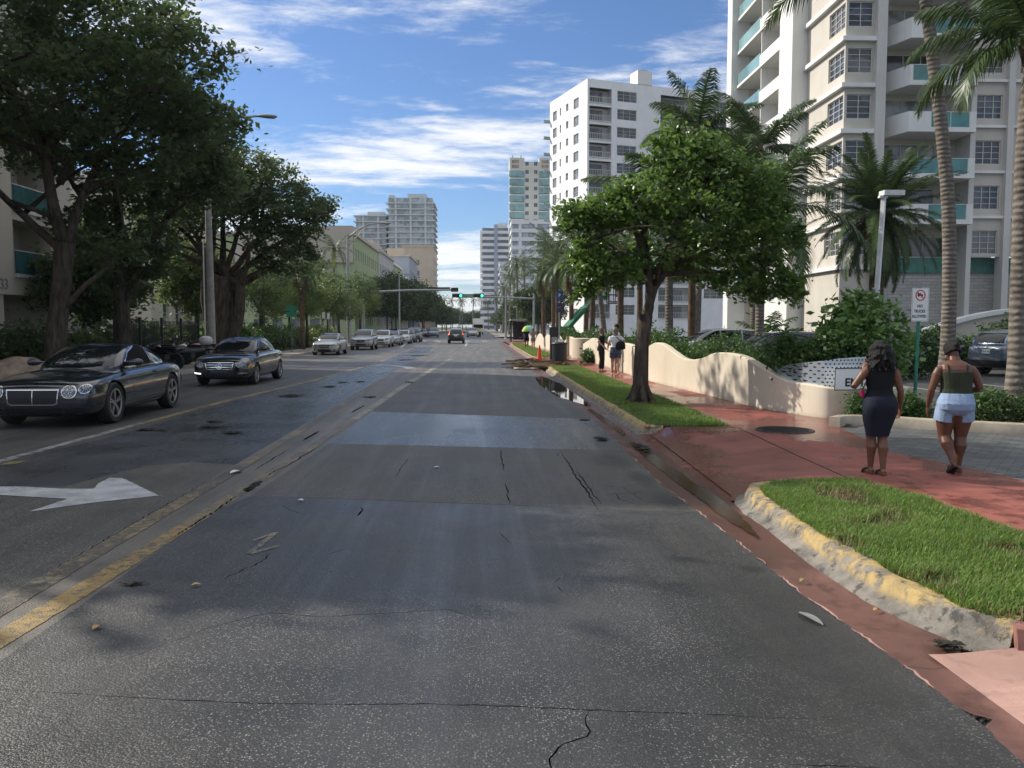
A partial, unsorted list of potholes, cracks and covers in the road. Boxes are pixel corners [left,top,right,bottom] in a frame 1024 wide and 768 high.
manhole cover [755,426,815,434]
crack [1,689,825,768]
crack [557,453,652,509]
